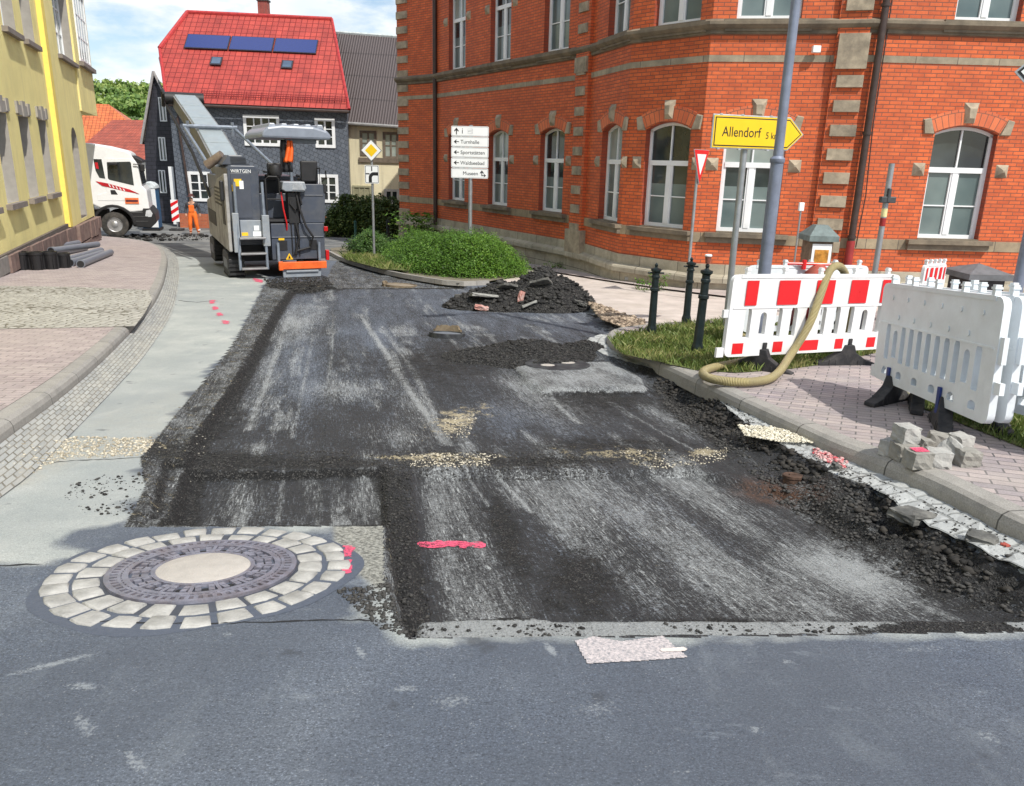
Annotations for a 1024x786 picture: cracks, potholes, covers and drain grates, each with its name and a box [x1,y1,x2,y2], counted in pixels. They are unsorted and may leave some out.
manhole cover [382,280,417,288]
utility cover [782,472,803,485]
manhole cover [429,325,465,339]
manhole cover [525,360,590,371]
manhole cover [103,540,297,605]
